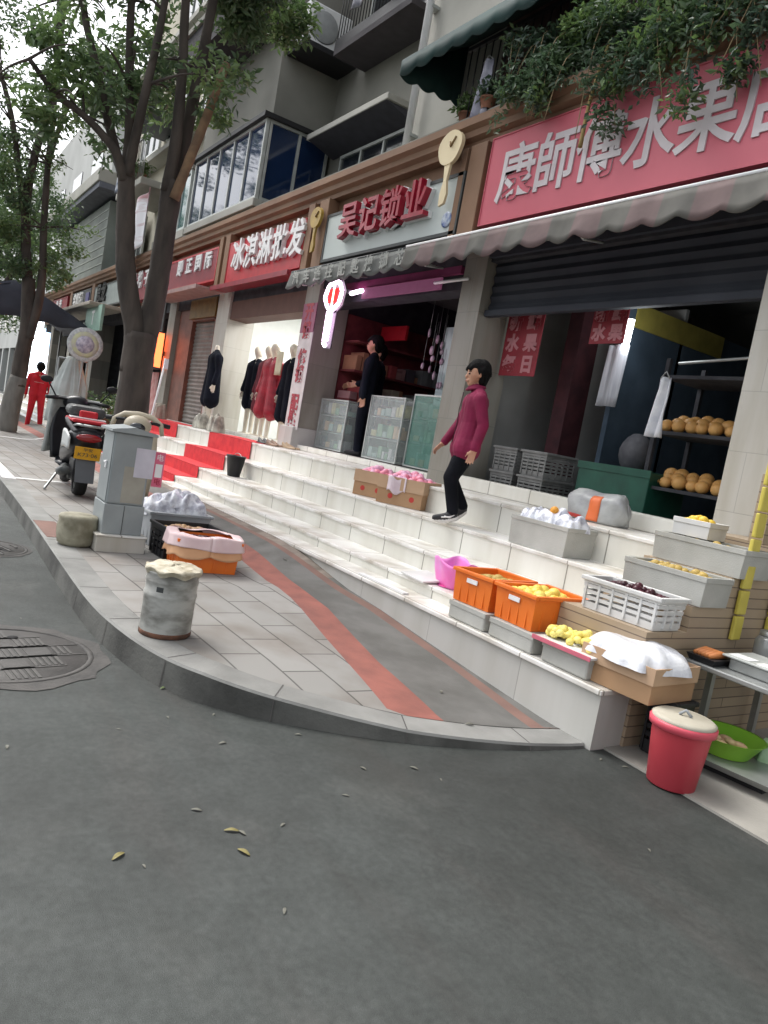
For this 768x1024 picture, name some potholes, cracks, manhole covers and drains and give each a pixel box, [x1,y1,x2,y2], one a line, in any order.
manhole cover [0,541,32,557]
manhole cover [0,624,111,691]
